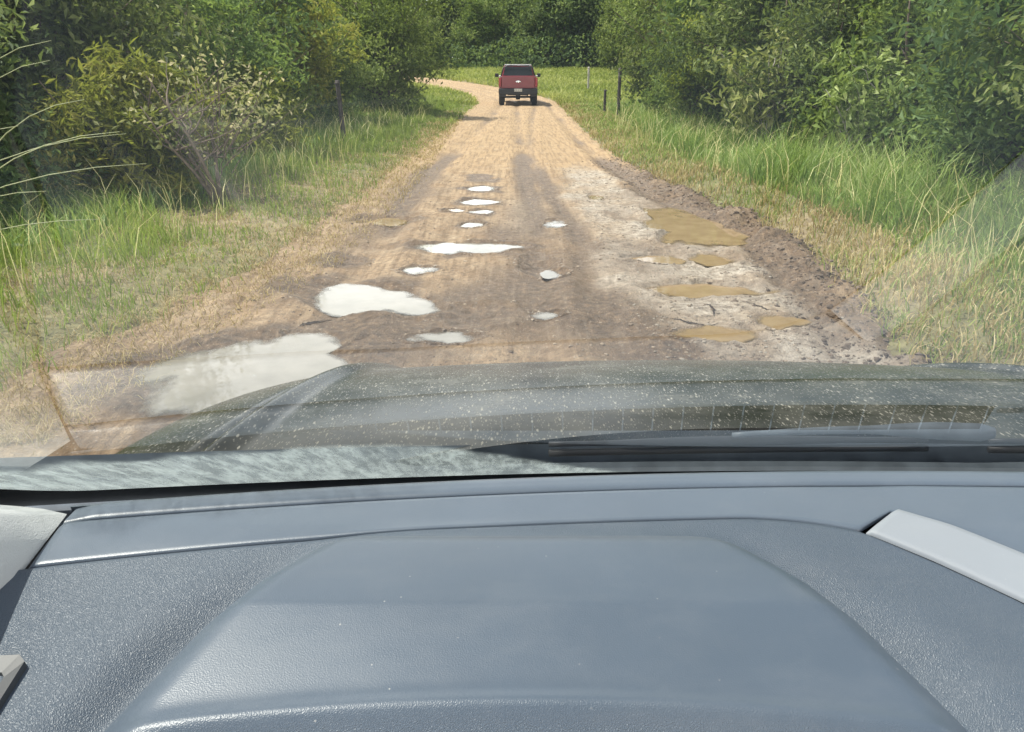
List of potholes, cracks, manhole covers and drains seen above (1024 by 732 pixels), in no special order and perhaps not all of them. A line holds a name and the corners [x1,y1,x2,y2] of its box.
pothole [685,250,748,270]
pothole [654,321,775,346]
pothole [453,197,504,206]
pothole [611,252,692,266]
pothole [398,238,542,256]
pothole [396,263,449,276]
pothole [97,325,404,441]
pothole [528,308,568,322]
pothole [628,199,774,253]
pothole [748,311,818,332]
pothole [513,252,563,281]
pothole [624,276,796,300]
